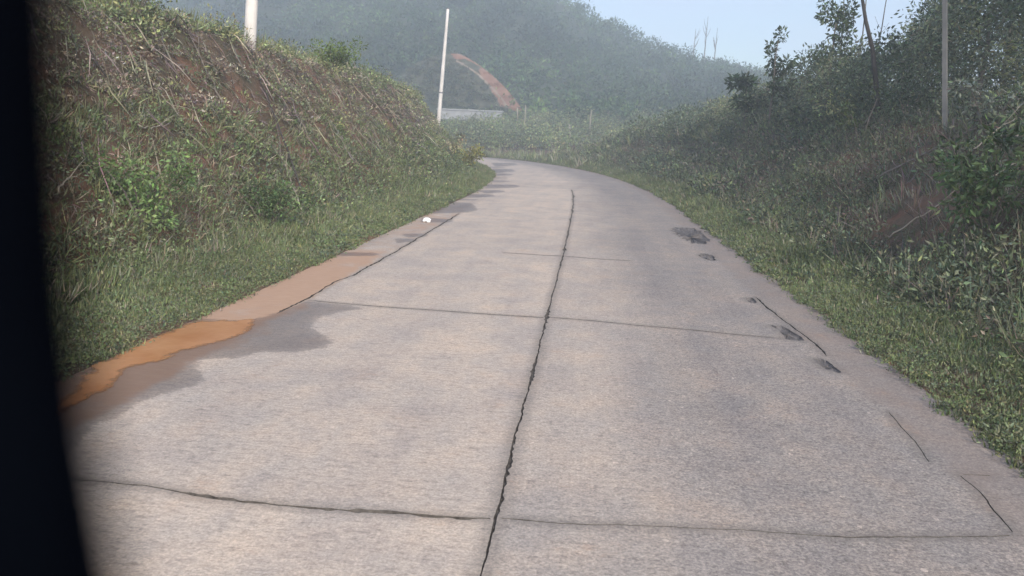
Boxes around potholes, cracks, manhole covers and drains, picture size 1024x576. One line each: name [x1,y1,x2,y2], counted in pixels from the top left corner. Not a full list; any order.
pothole [813,358,841,373]
pothole [671,227,710,244]
pothole [771,325,804,341]
crack [112,190,1013,576]
